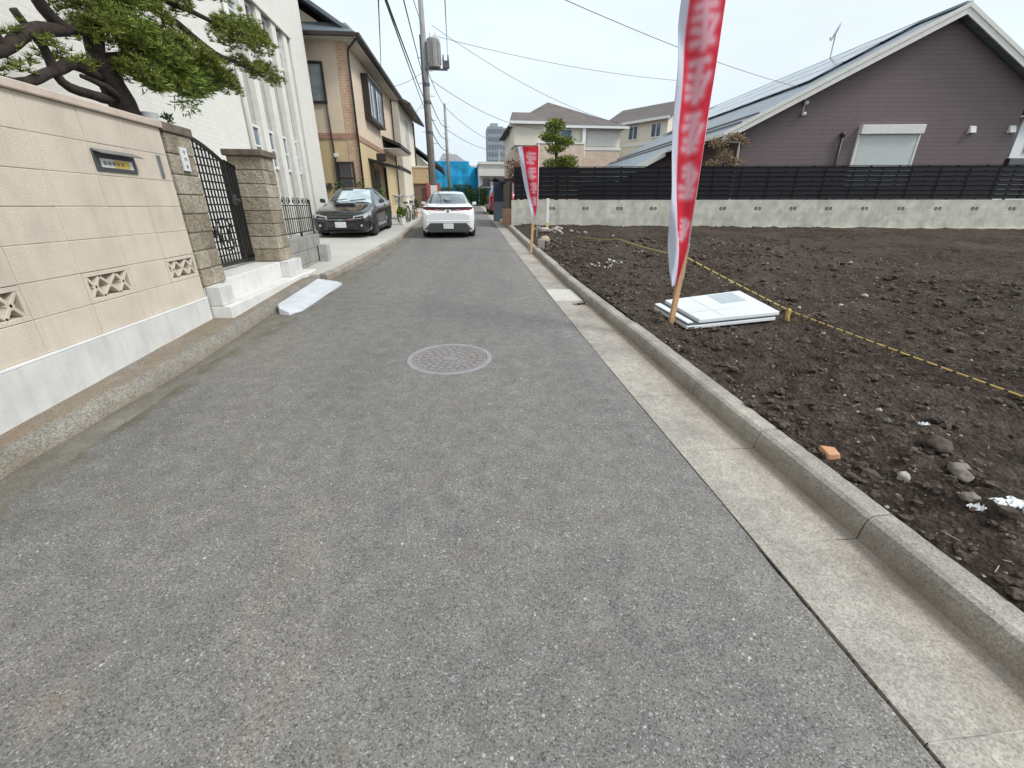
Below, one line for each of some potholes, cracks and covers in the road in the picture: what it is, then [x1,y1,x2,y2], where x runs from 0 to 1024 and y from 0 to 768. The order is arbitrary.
manhole cover [407,344,492,375]
